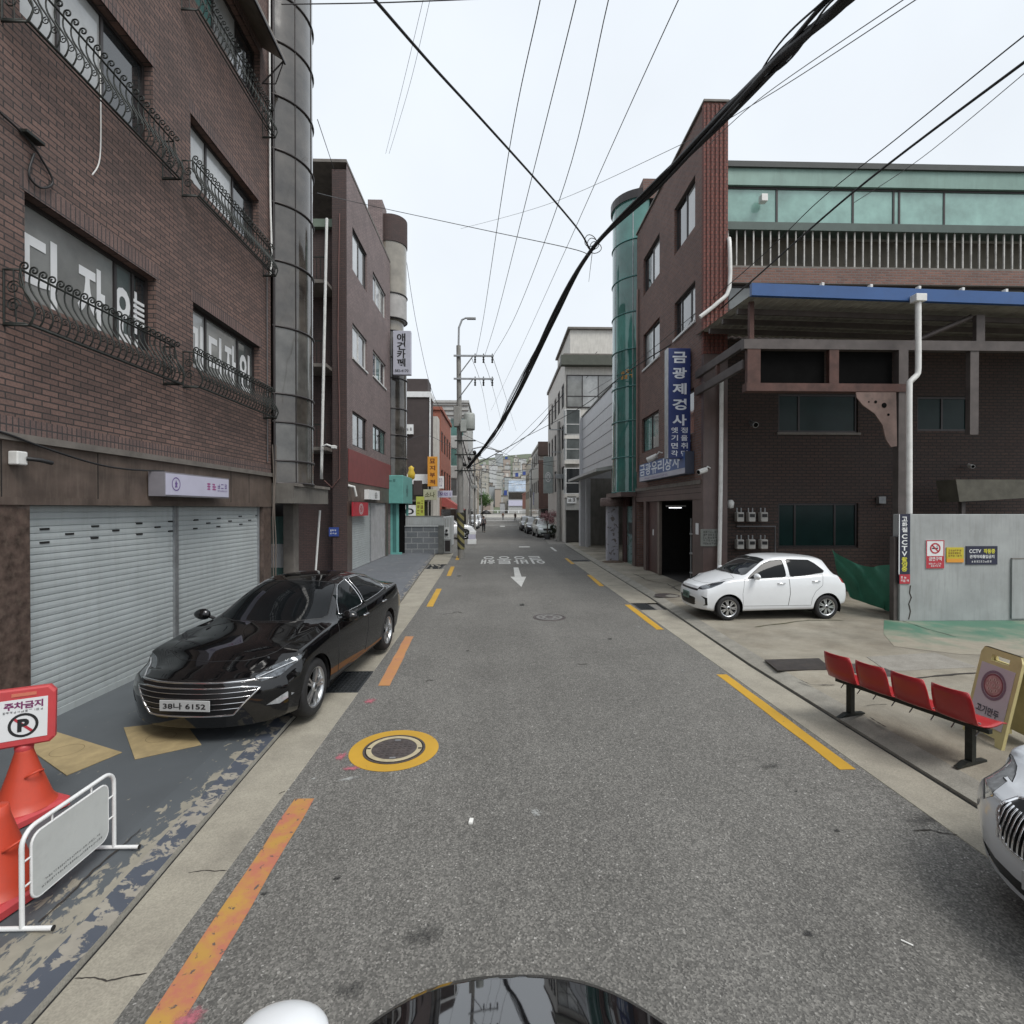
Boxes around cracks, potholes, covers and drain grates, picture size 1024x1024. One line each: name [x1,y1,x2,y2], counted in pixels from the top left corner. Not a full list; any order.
crack [77,973,146,982]
drain grate [325,671,374,693]
manhole cover [348,730,439,772]
